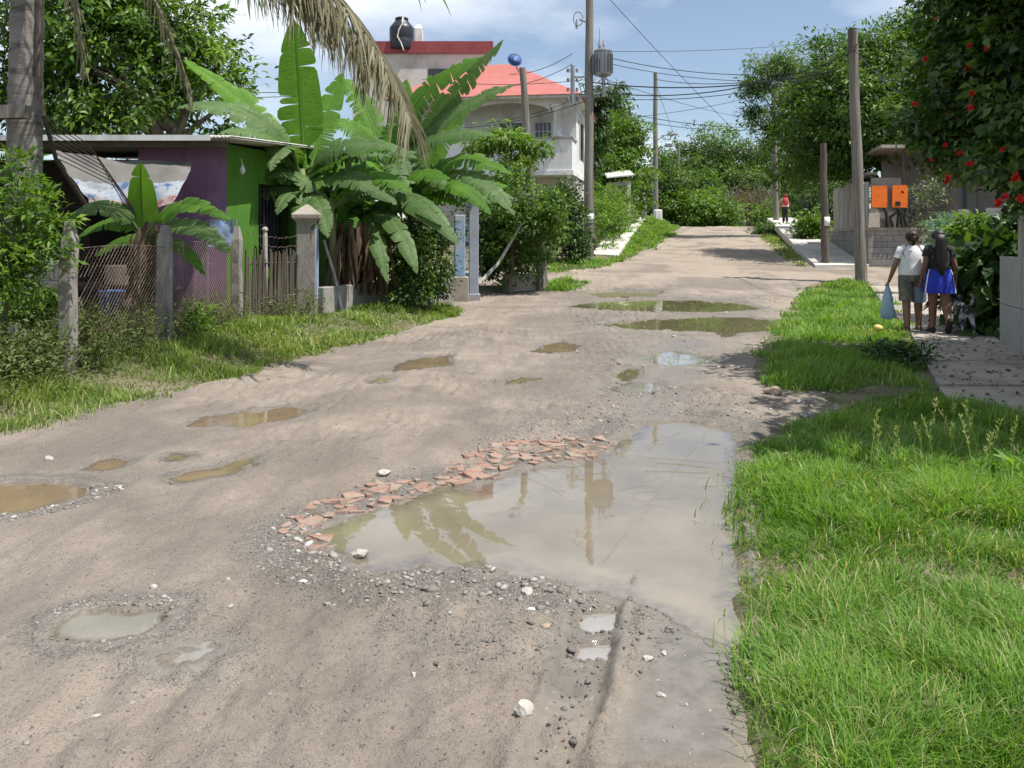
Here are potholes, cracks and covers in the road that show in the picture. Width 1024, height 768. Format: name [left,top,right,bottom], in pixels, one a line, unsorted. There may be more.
pothole [529,341,583,354]
pothole [571,638,614,667]
pothole [646,350,725,366]
pothole [315,417,770,662]
pothole [586,315,779,337]
pothole [184,402,322,428]
pothole [564,296,768,312]
pothole [384,354,454,372]
pothole [154,641,221,666]
pothole [80,455,141,472]
pothole [0,479,94,514]
pothole [157,447,270,485]
